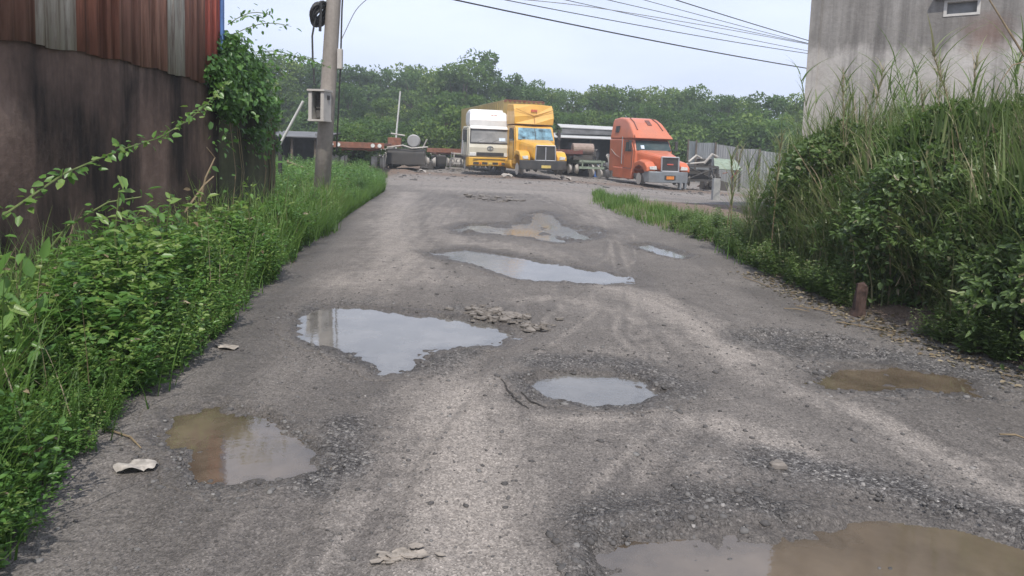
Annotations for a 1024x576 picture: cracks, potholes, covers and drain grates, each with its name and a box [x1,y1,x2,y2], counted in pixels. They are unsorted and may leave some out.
pothole [437,209,620,245]
pothole [545,491,1024,576]
pothole [413,245,657,287]
pothole [269,301,564,382]
pothole [768,357,1024,409]
pothole [117,394,356,512]
crack [501,379,546,409]
pothole [619,241,700,260]
pothole [482,359,707,420]
